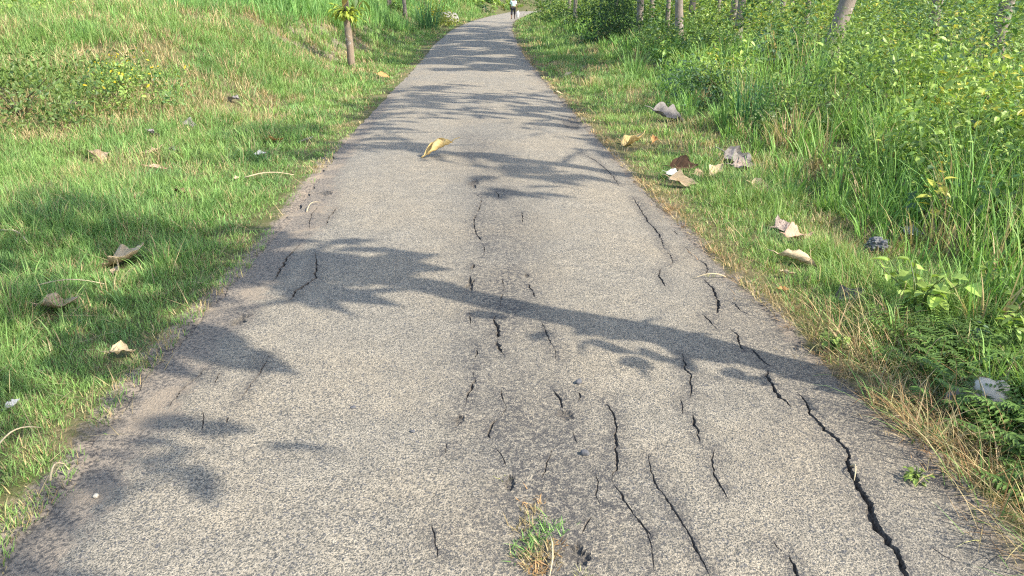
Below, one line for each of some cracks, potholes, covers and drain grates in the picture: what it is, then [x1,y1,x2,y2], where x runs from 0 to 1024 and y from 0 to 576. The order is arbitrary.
crack [470,192,499,269]
crack [431,526,439,558]
crack [273,207,337,301]
crack [542,433,578,477]
crack [584,154,909,576]
crack [554,391,581,409]
crack [465,278,505,405]
crack [169,367,220,429]
crack [487,390,507,465]
